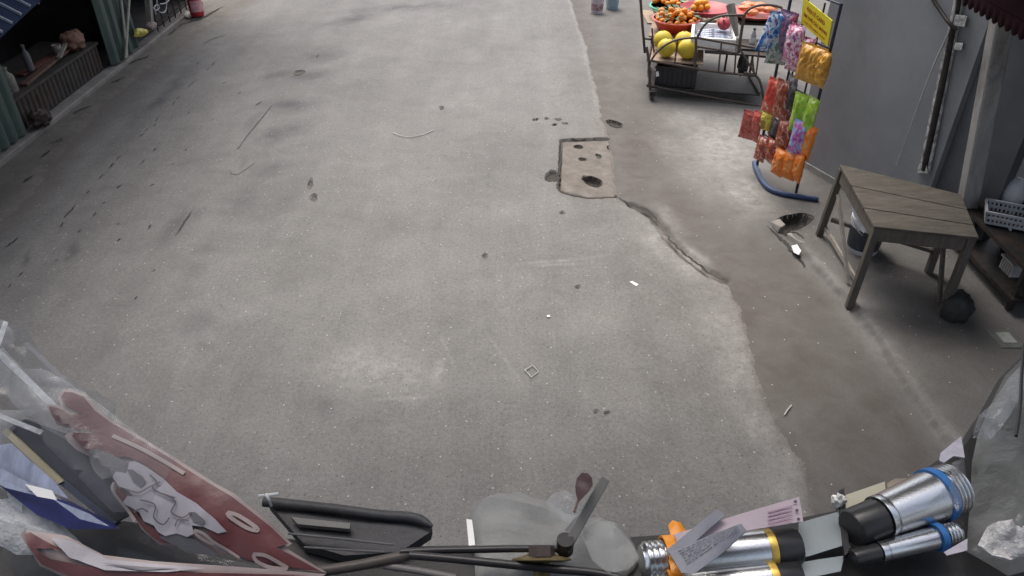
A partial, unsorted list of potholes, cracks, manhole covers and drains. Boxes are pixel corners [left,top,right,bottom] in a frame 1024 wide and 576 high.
pothole [545,170,561,182]
crack [619,198,724,280]
pothole [776,213,814,234]
pothole [581,176,602,187]
